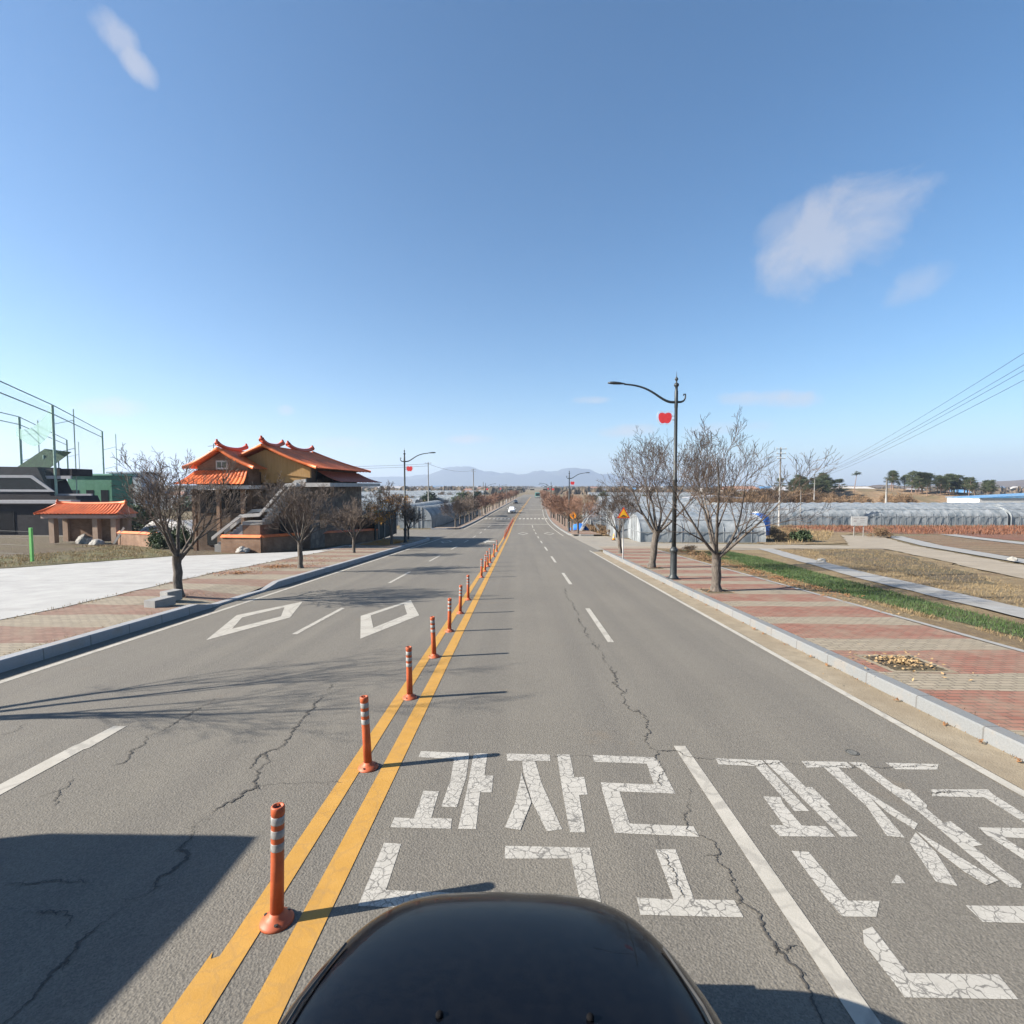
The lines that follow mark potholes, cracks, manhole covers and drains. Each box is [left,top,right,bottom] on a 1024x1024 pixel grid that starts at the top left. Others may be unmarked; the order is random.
crack [2,685,341,1024]
crack [565,588,935,785]
crack [649,824,685,898]
crack [683,790,825,1024]
